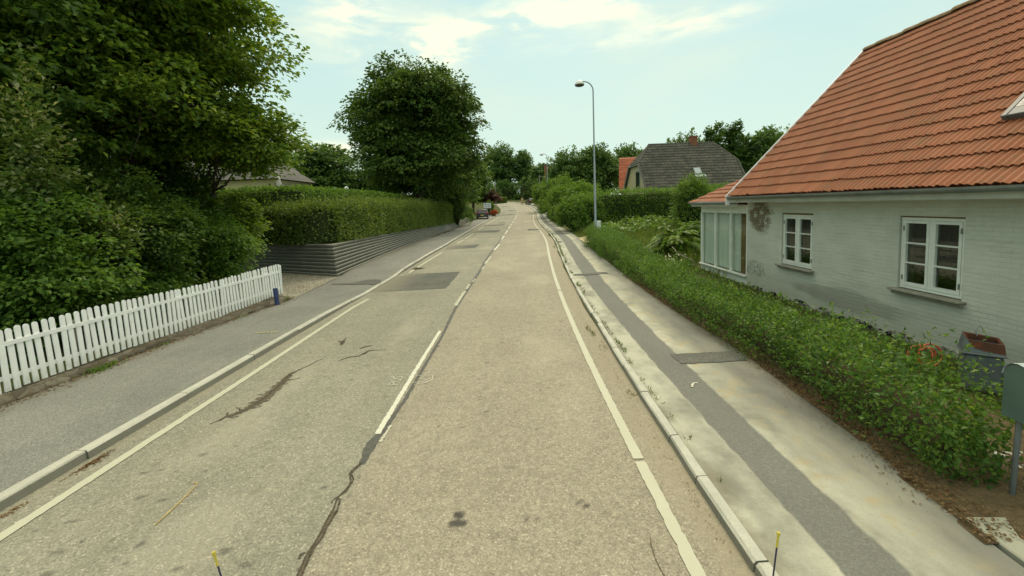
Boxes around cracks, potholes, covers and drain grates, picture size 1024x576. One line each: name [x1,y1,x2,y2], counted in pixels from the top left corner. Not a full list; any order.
crack [210,359,321,424]
crack [296,461,363,576]
crack [339,338,386,361]
